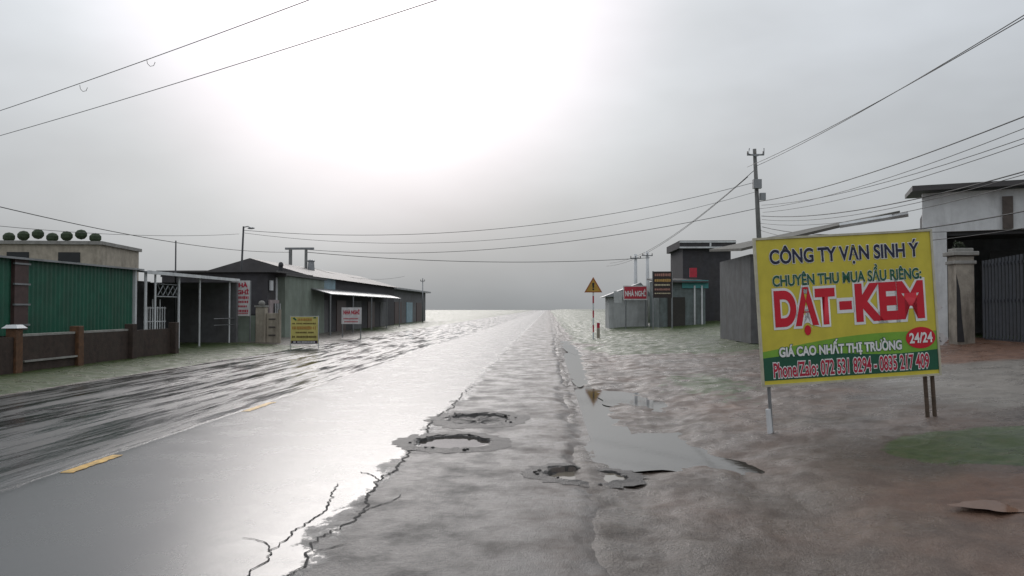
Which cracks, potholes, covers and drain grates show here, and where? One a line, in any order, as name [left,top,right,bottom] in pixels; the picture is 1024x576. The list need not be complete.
pothole [392,431,512,454]
crack [247,388,471,576]
pothole [424,410,530,429]
pothole [520,463,648,489]
